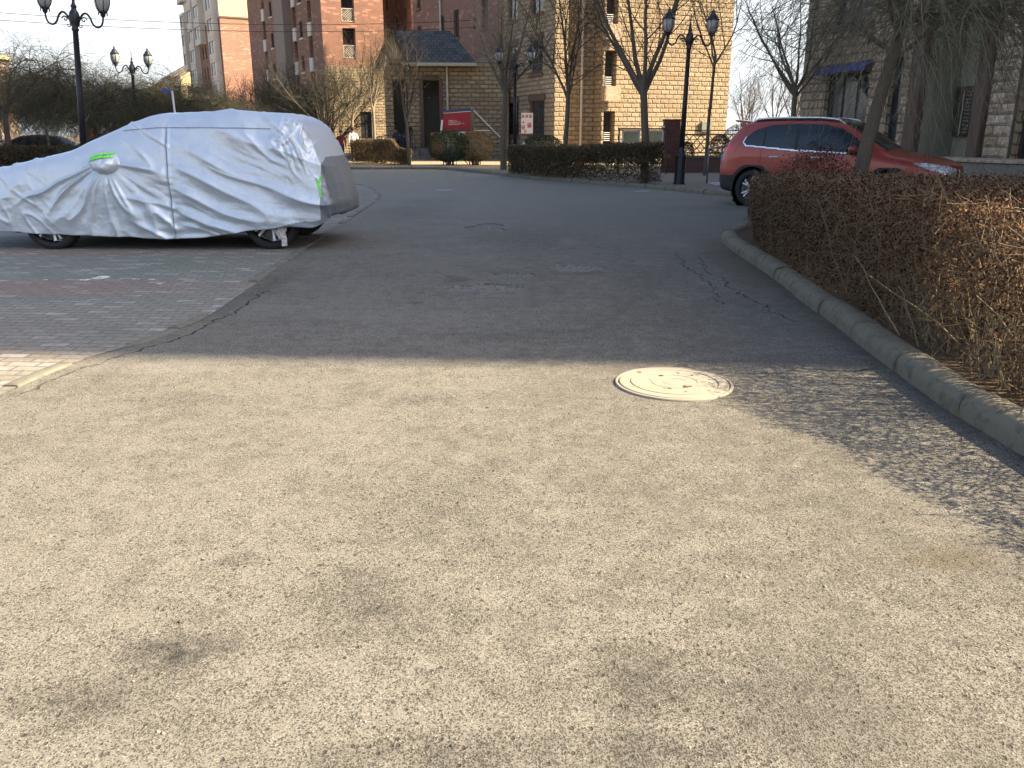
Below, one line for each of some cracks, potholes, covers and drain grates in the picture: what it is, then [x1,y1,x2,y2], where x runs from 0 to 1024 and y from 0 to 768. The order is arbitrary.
manhole cover [615,367,734,402]
crack [675,253,794,323]
crack [17,290,270,396]
